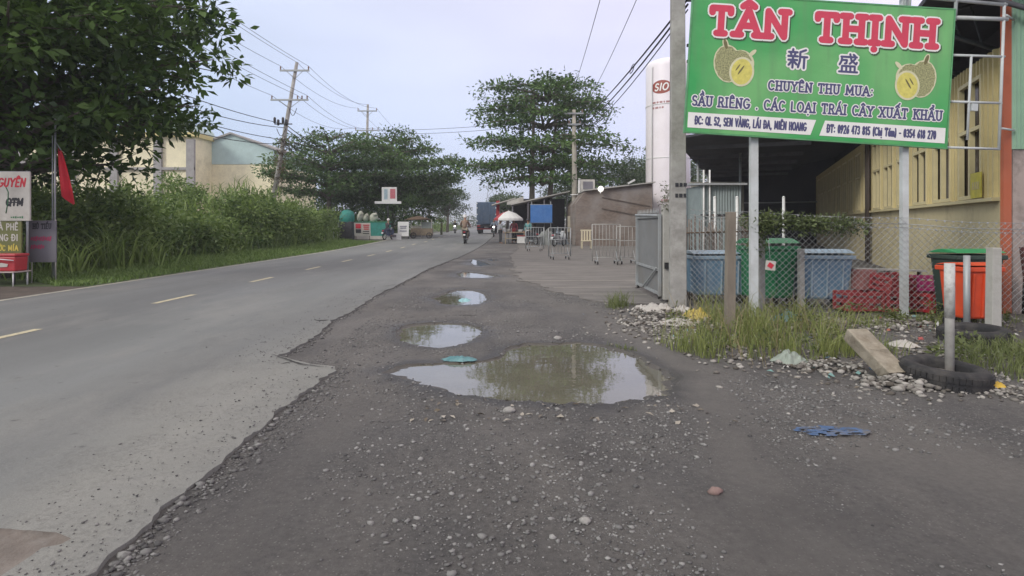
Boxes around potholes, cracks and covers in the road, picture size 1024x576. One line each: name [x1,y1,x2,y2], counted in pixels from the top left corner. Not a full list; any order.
pothole [381,342,676,404]
pothole [430,289,489,306]
pothole [396,322,483,348]
